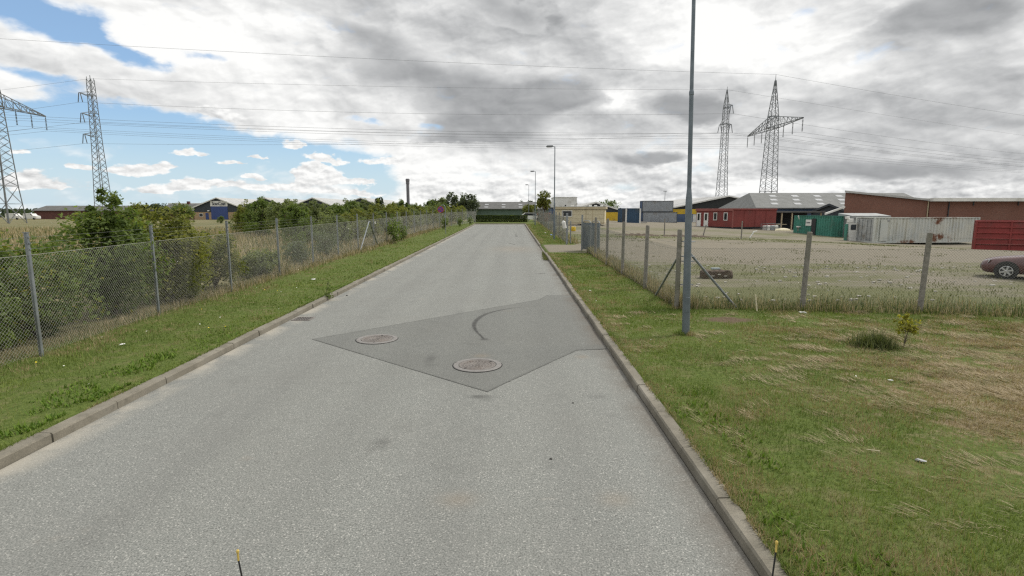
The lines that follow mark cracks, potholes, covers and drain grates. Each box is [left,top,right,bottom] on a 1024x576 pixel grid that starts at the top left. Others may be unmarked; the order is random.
manhole cover [452,358,503,373]
manhole cover [355,334,398,344]
